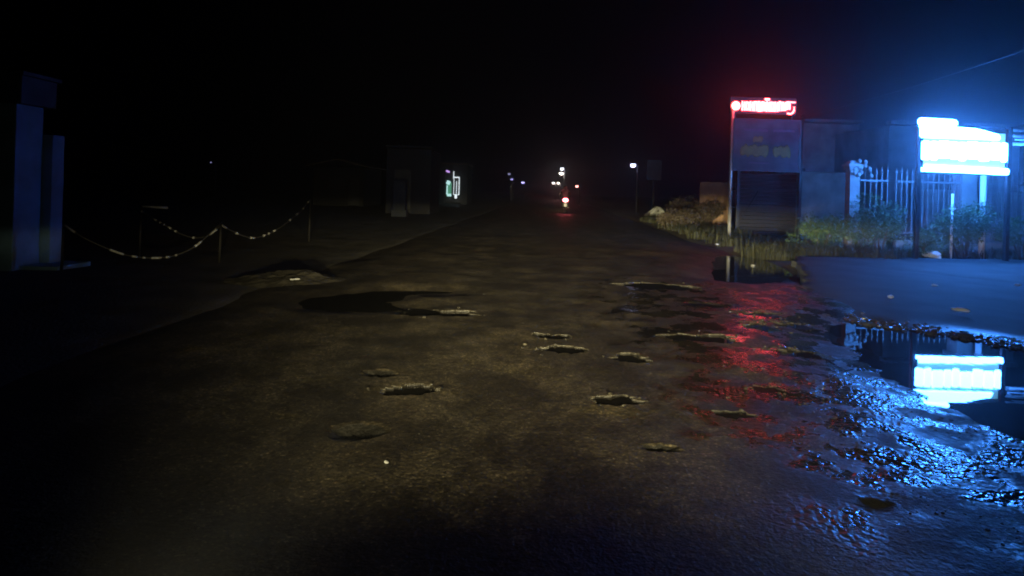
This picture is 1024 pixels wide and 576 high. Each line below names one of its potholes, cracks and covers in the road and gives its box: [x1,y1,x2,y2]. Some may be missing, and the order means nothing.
pothole [588,392,649,407]
pothole [851,497,899,512]
pothole [653,331,738,344]
pothole [530,332,572,340]
pothole [325,420,392,442]
pothole [521,343,589,355]
pothole [637,442,684,453]
pothole [360,368,401,378]
pothole [602,352,652,363]
pothole [366,383,442,396]
pothole [395,306,485,318]
pothole [610,281,705,291]
